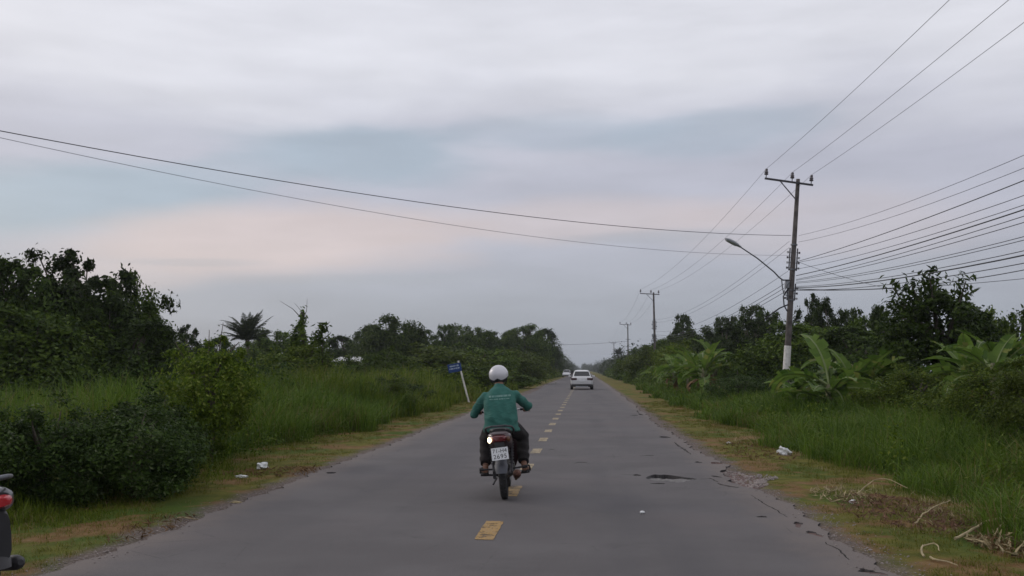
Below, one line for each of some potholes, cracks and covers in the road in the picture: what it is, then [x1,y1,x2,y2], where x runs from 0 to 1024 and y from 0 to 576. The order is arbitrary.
crack [709,478,787,517]
pothole [721,470,778,489]
pothole [646,474,695,483]
